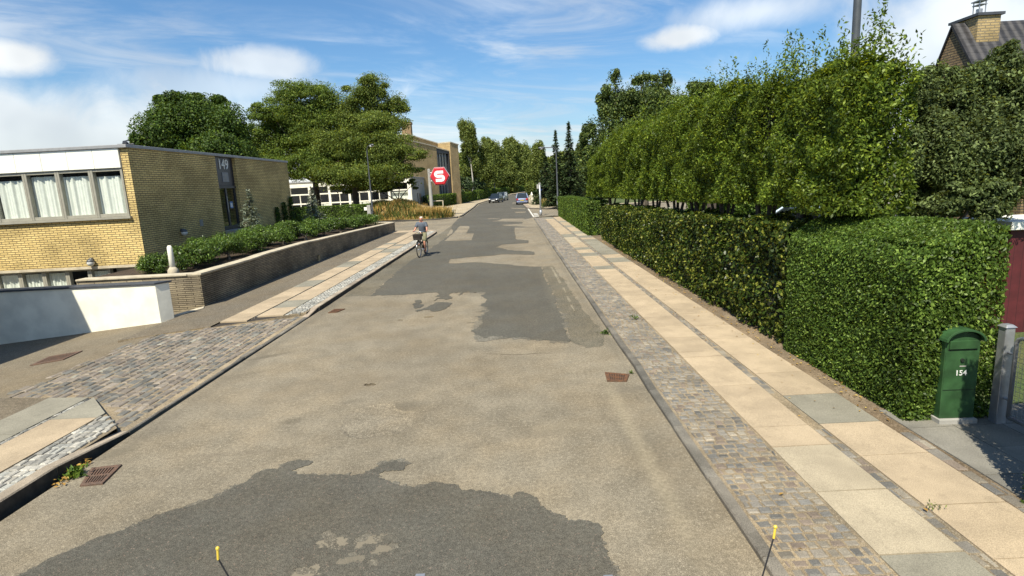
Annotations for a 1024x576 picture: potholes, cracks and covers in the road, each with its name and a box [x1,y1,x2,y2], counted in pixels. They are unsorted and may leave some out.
drain grate [605,372,629,382]
manhole cover [30,351,83,366]
drain grate [80,464,122,487]
